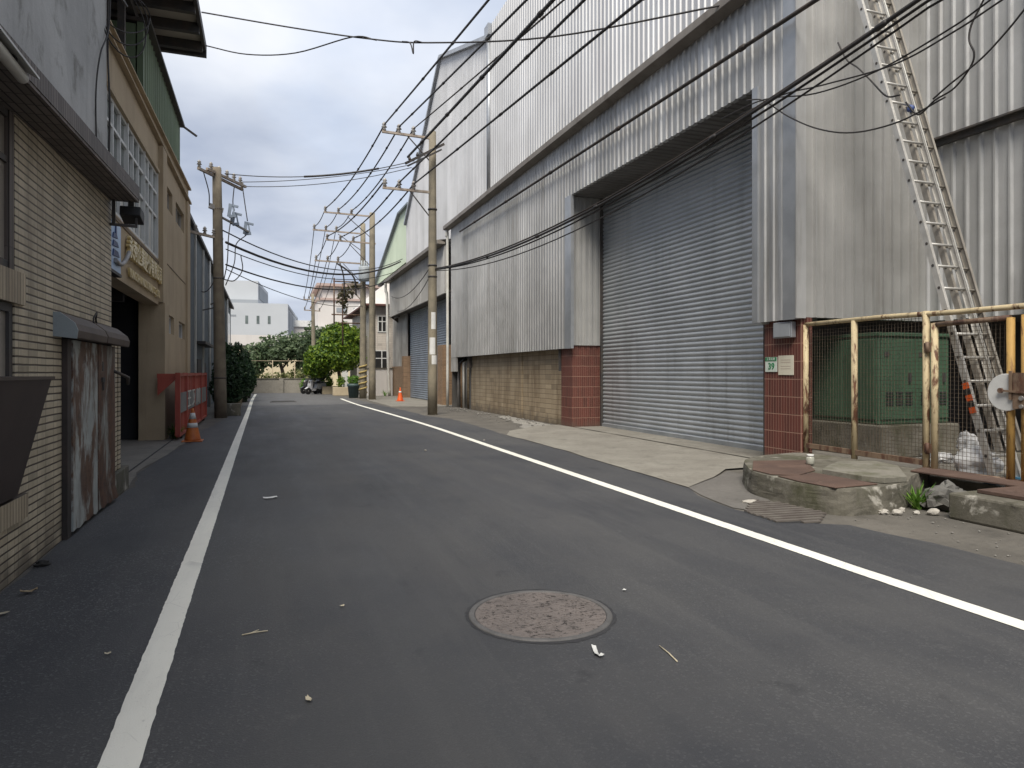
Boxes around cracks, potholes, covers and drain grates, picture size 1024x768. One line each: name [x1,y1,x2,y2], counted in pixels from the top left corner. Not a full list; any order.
drain grate [744,499,827,524]
manhole cover [468,590,613,642]
